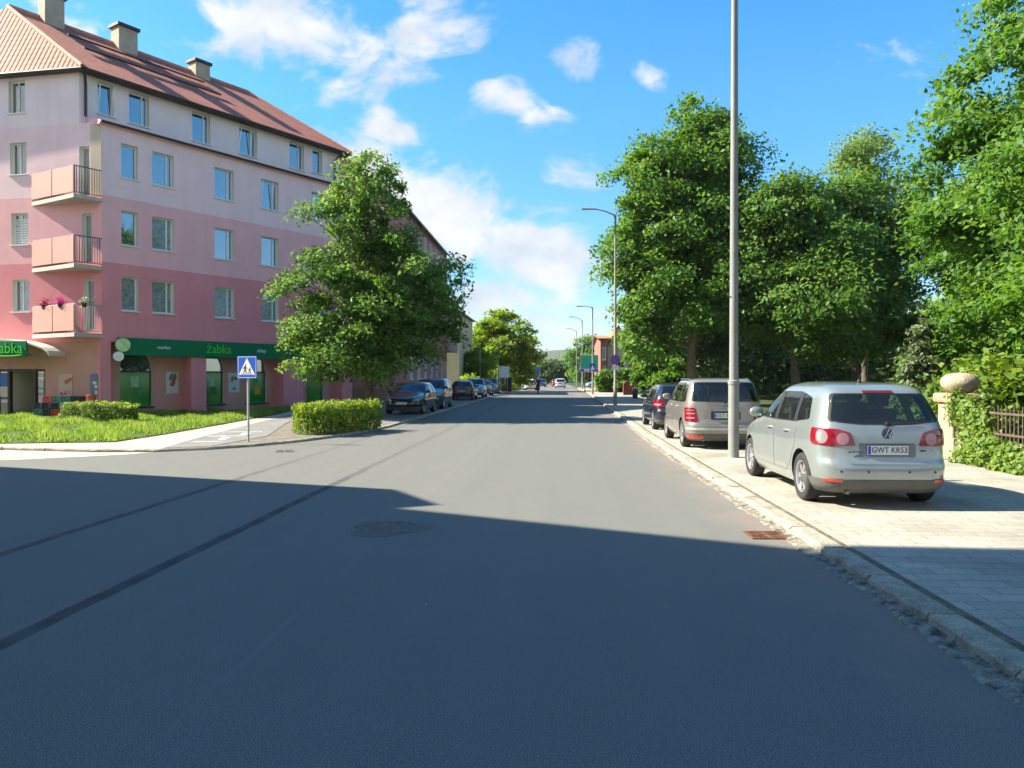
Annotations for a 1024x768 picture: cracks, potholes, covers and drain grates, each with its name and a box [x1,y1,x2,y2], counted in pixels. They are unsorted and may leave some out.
manhole cover [350,520,436,538]
drain grate [743,531,788,540]
